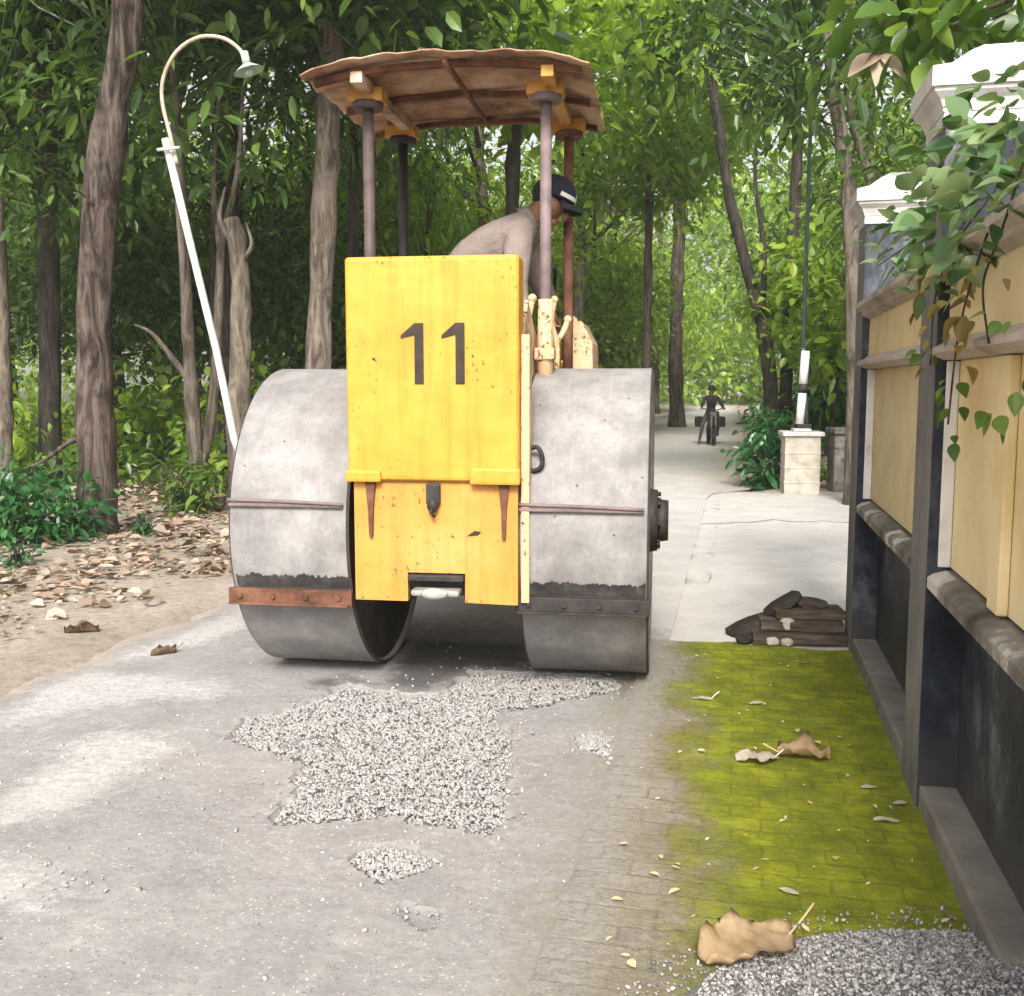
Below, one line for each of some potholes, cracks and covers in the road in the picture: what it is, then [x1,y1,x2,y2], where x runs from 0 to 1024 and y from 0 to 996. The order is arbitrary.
pothole [221,669,622,835]
pothole [345,836,449,884]
pothole [391,898,447,932]
